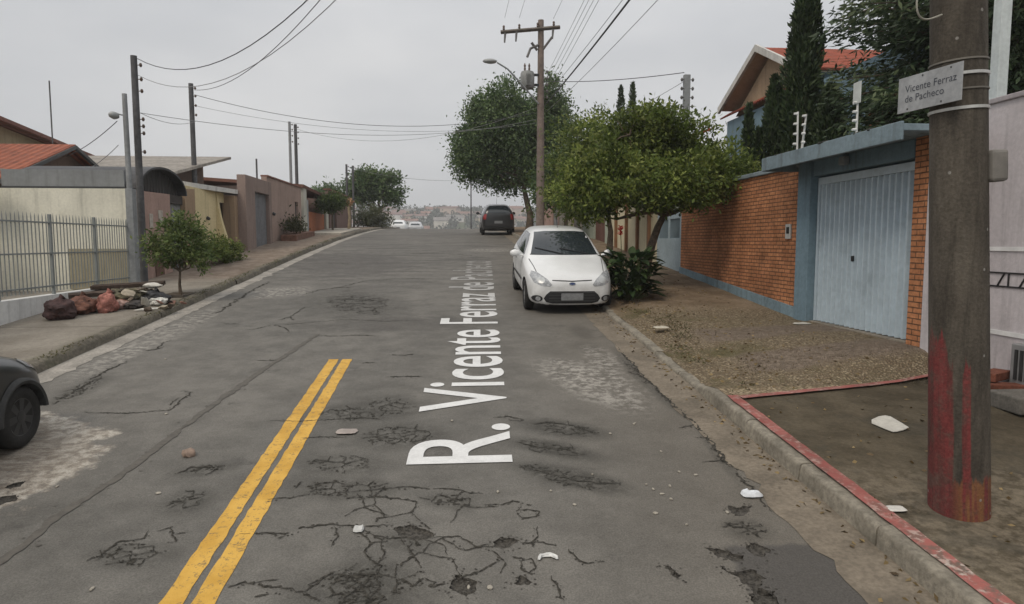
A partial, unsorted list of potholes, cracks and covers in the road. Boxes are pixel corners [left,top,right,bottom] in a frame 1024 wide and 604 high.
pothole [716,562,787,604]
crack [229,398,604,604]
crack [52,362,191,414]
pothole [704,543,752,568]
pothole [745,539,778,561]
crack [216,282,269,325]
crack [87,526,185,567]
crack [166,464,224,508]
crack [616,345,771,538]
pothole [725,503,752,516]
crack [248,278,428,336]
